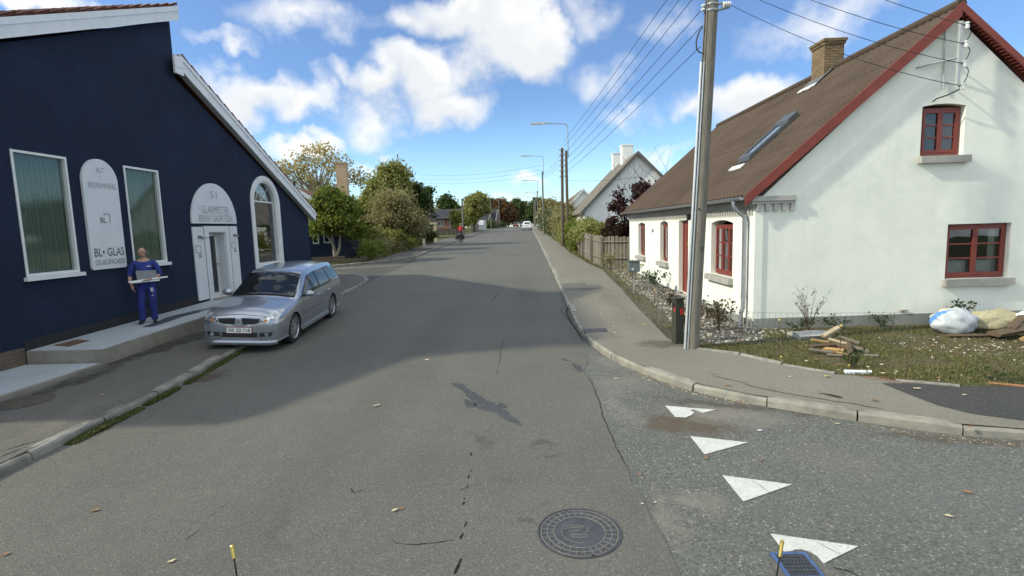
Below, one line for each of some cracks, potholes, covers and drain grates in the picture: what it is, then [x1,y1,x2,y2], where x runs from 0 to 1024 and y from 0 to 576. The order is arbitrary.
crack [393,453,472,574]
drain grate [769,552,825,576]
manhole cover [538,508,622,559]
crack [708,372,882,409]
